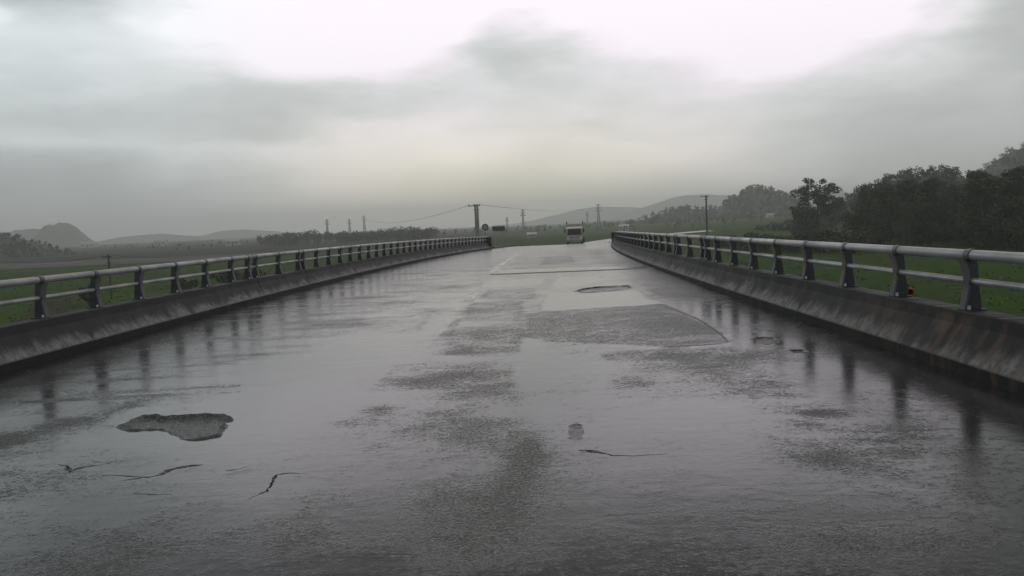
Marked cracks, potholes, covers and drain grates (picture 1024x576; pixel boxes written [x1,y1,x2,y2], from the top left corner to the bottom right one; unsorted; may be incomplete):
pothole [575,285,632,293]
pothole [568,423,585,441]
pothole [115,413,234,441]
pothole [749,337,780,345]
crack [226,467,297,499]
crack [59,464,201,495]
